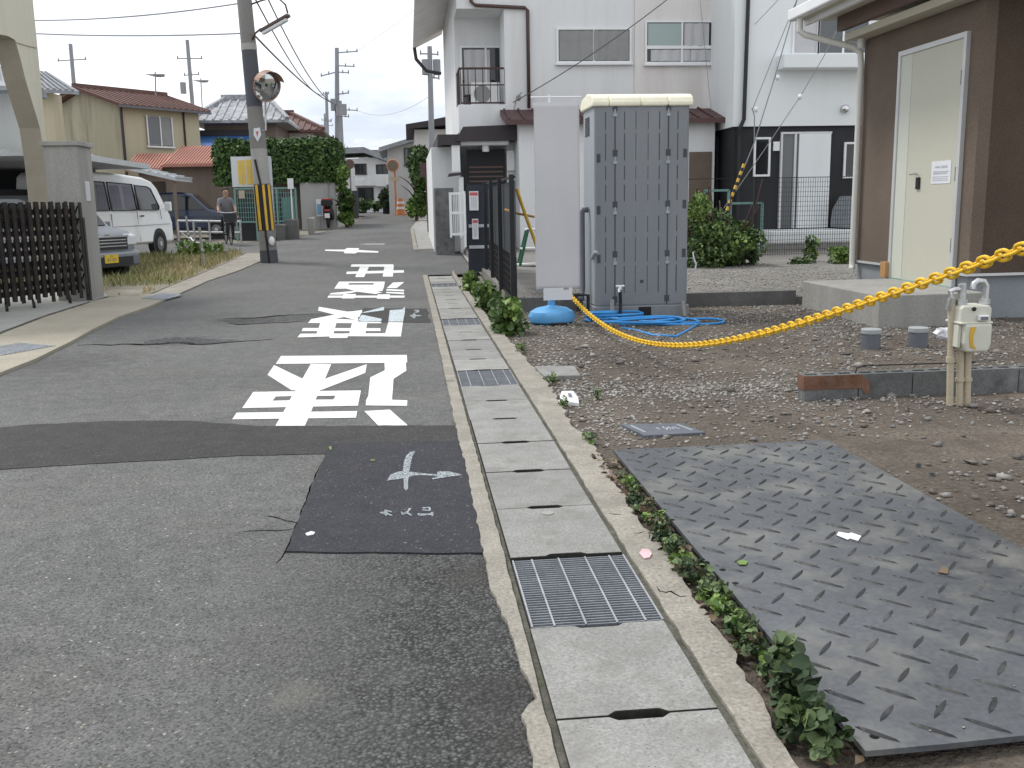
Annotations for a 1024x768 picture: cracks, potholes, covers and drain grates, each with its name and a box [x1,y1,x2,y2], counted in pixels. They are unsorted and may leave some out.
drain grate [457,369,518,388]
crack [243,468,319,564]
drain grate [512,554,664,629]
